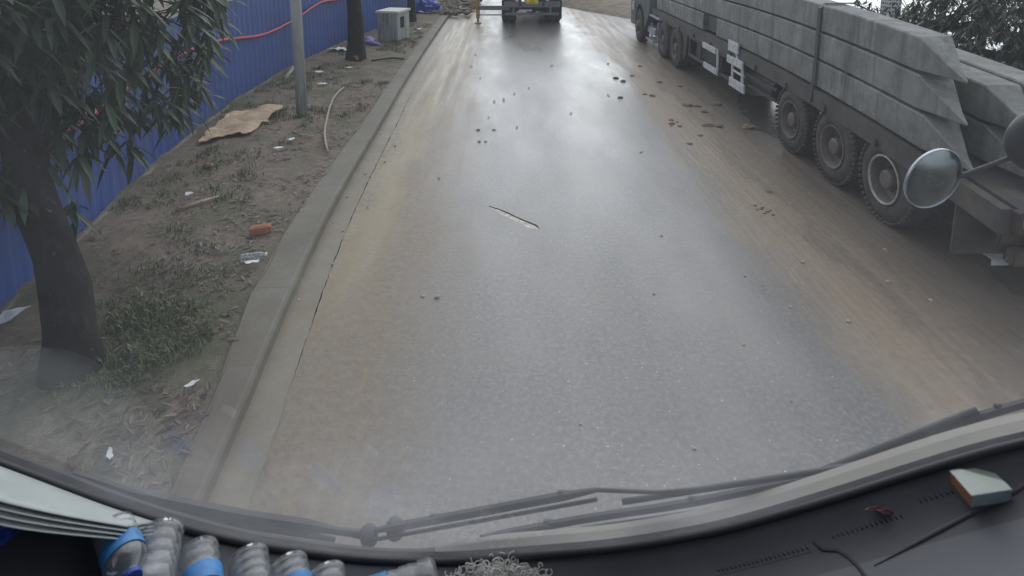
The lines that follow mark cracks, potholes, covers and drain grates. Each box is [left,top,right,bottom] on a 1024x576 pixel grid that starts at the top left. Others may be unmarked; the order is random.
crack [490,206,539,229]
crack [291,91,413,384]
